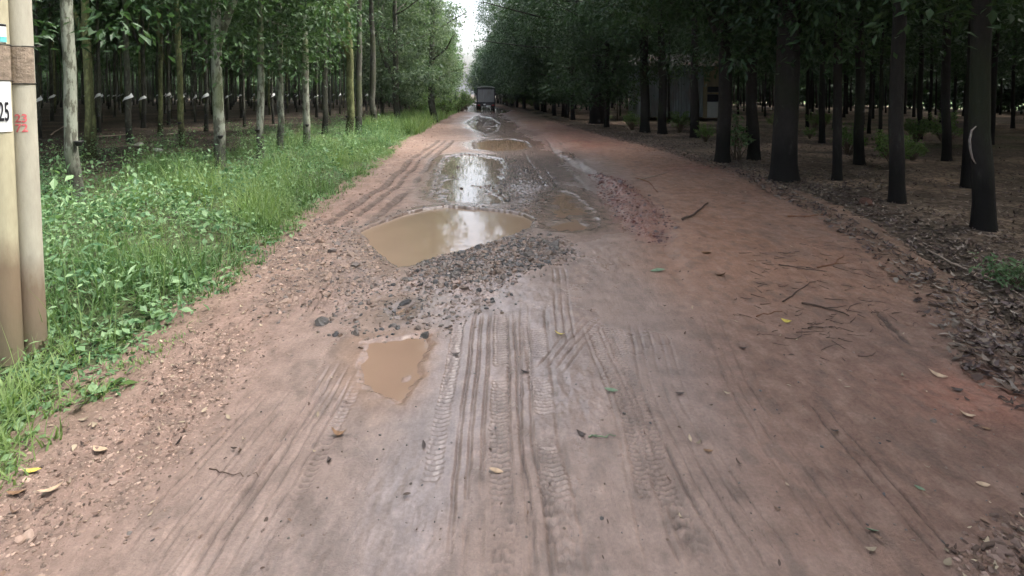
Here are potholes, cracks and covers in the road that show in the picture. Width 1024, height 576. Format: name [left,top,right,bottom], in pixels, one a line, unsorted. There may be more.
pothole [425,153,511,205]
pothole [343,326,446,412]
pothole [466,116,502,133]
pothole [534,188,606,235]
pothole [469,138,535,151]
pothole [353,204,542,269]
